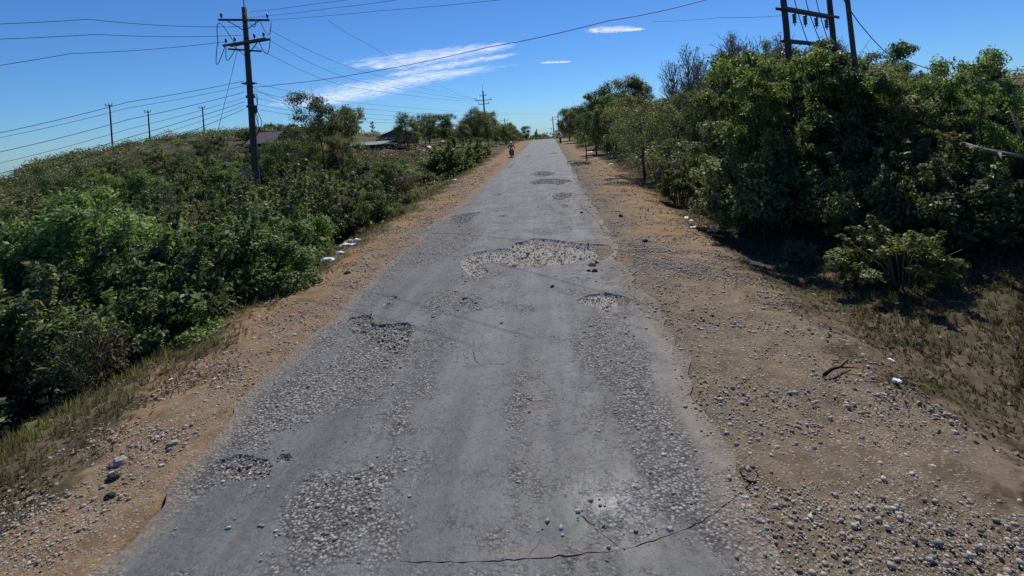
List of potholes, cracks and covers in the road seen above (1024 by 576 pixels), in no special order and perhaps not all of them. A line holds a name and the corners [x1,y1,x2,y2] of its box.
pothole [209,454,273,481]
pothole [458,238,614,278]
crack [402,482,752,563]
pothole [349,315,412,355]
pothole [576,293,631,313]
pothole [447,212,481,224]
